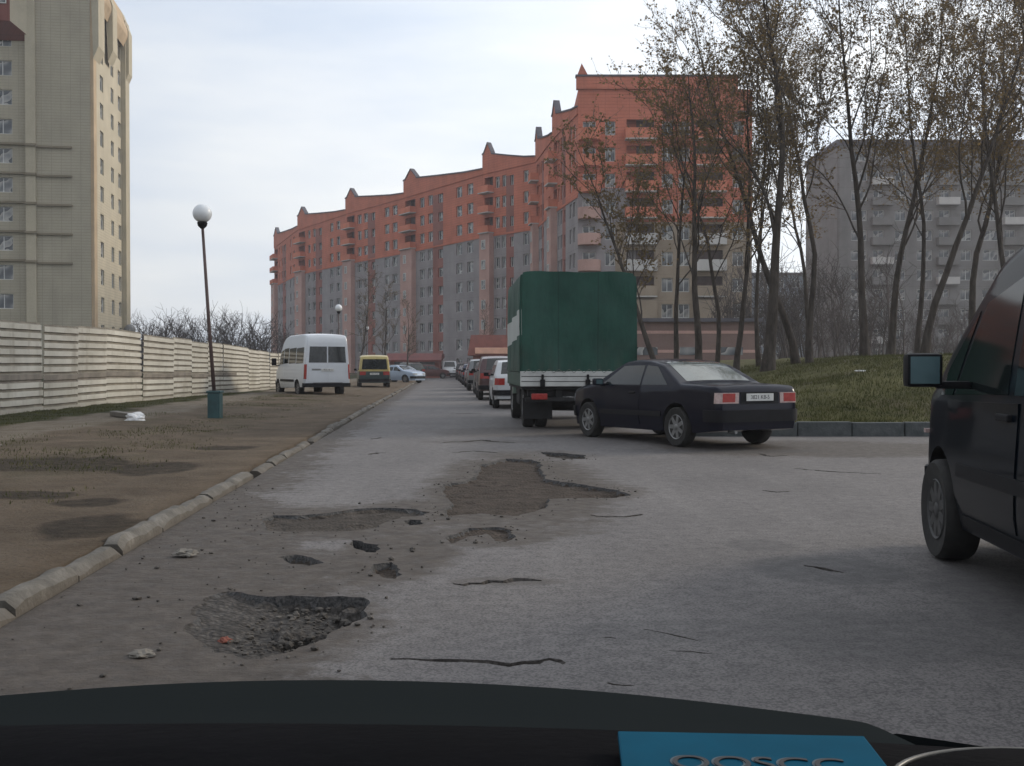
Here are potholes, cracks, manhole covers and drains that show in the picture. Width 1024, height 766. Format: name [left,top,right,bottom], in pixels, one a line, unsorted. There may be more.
crack [453,578,541,586]
pothole [182,591,370,659]
crack [391,658,566,667]
pothole [350,540,380,552]
crack [761,454,874,474]
crack [645,629,711,654]
pothole [440,459,631,517]
pothole [279,555,324,566]
pothole [445,527,516,544]
crack [804,565,844,573]
pothole [260,508,429,532]
pothole [370,562,402,579]
